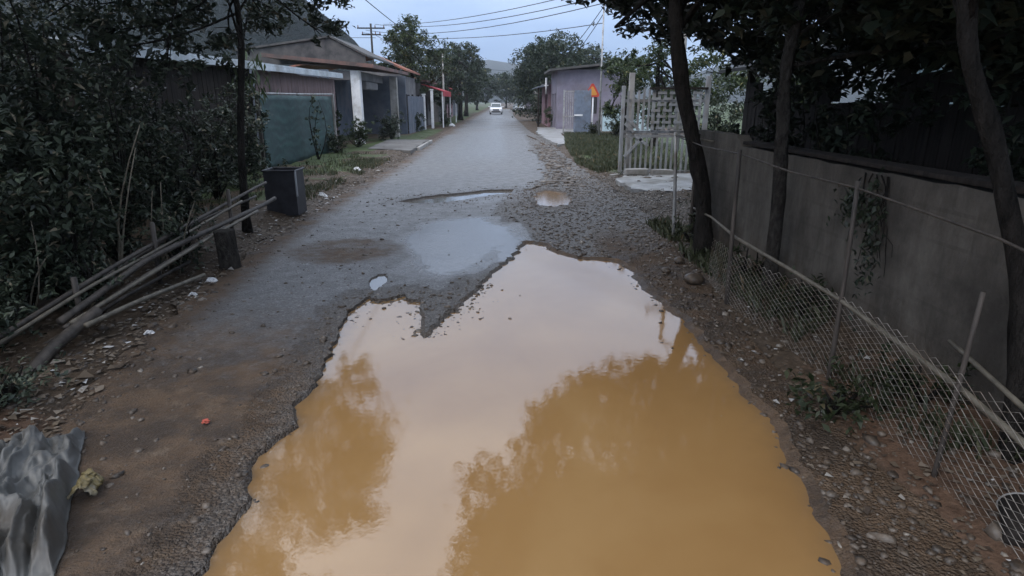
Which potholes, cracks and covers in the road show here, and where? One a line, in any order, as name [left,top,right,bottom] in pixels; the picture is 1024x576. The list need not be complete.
pothole [399,189,514,203]
pothole [533,190,572,206]
pothole [193,240,857,576]
